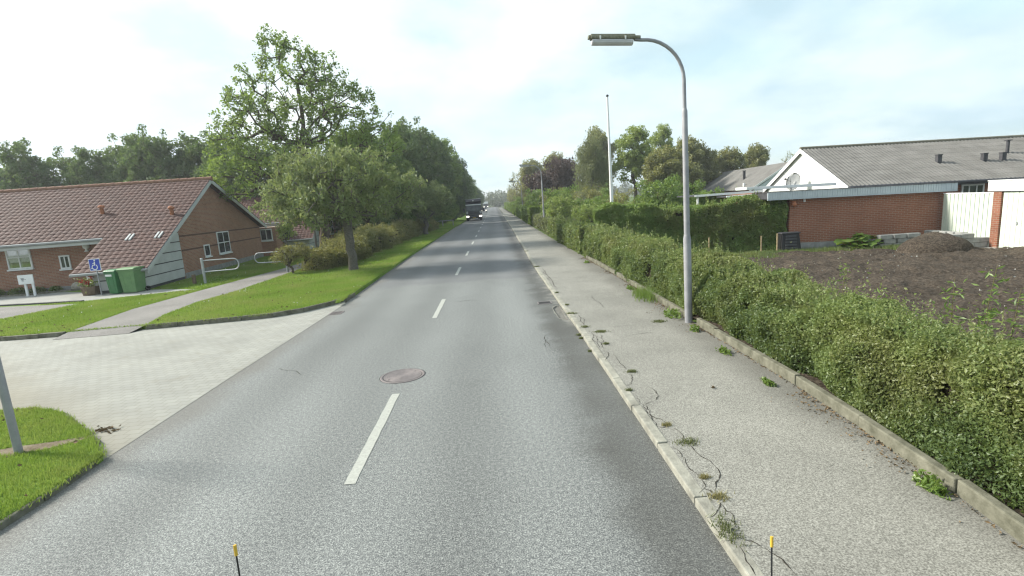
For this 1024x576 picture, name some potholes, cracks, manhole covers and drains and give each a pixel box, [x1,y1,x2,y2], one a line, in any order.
manhole cover [379,368,426,384]
crack [711,504,791,574]
